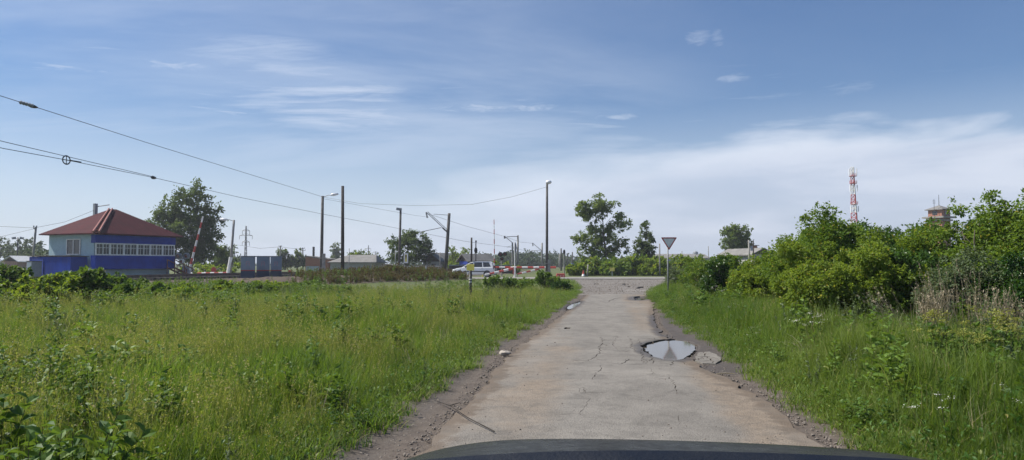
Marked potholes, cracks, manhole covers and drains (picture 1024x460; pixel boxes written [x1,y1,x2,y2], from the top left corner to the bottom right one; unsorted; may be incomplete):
pothole [640,339,698,360]
crack [552,337,714,416]
